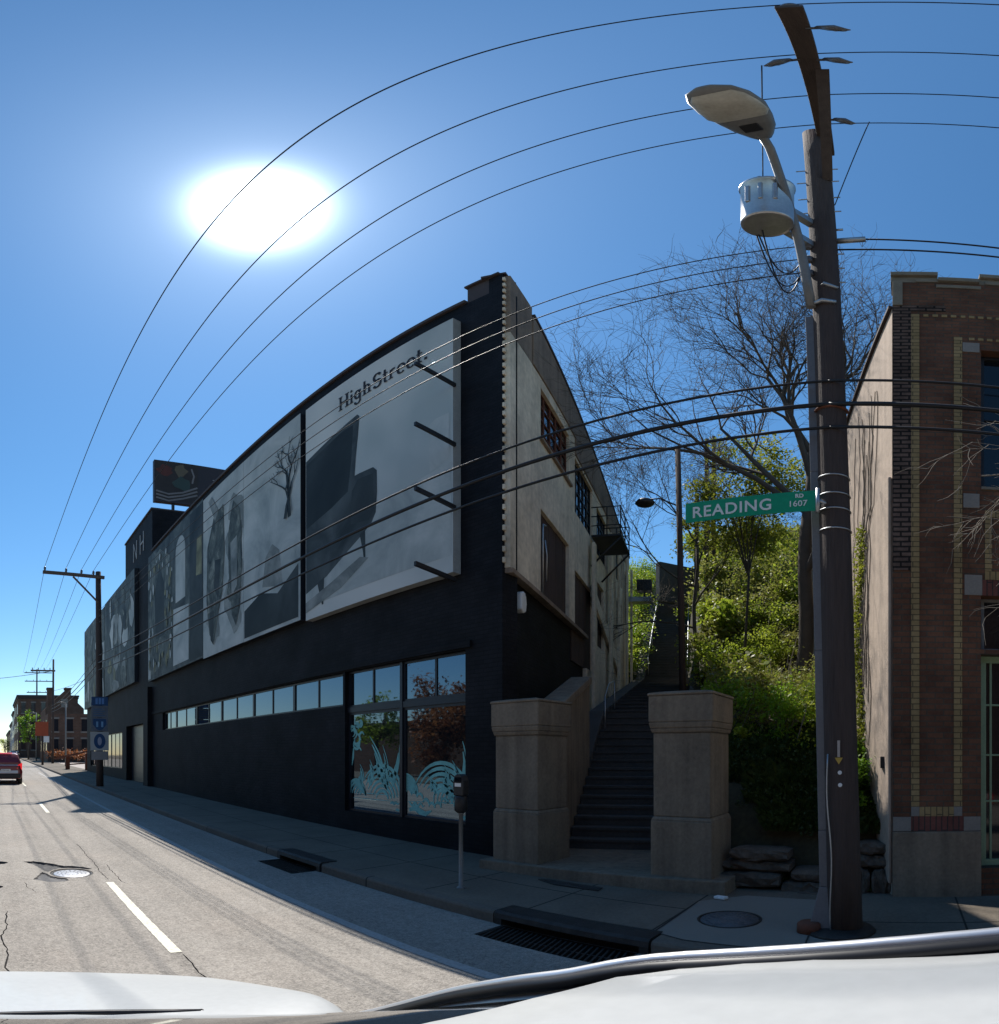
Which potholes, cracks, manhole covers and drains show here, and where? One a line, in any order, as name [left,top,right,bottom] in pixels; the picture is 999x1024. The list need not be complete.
drain grate [259,848,337,874]
manhole cover [697,911,762,928]
crack [0,913,9,971]
pothole [25,861,92,872]
drain grate [476,905,663,963]
pothole [34,872,68,882]
manhole cover [50,869,93,878]
